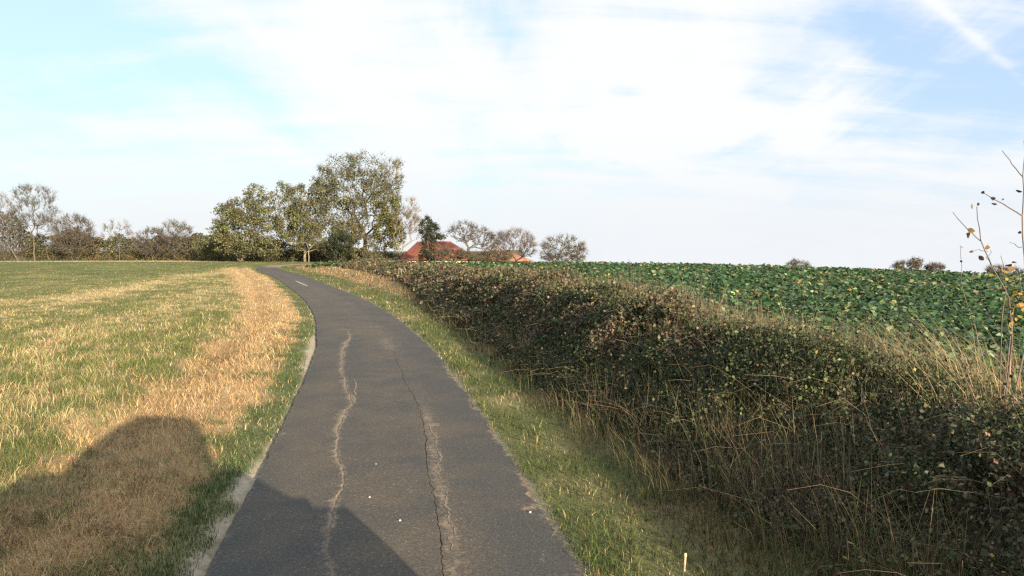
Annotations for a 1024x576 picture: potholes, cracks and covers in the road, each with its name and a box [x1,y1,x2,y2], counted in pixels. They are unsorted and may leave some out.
crack [396,359,457,576]
crack [325,329,357,576]
